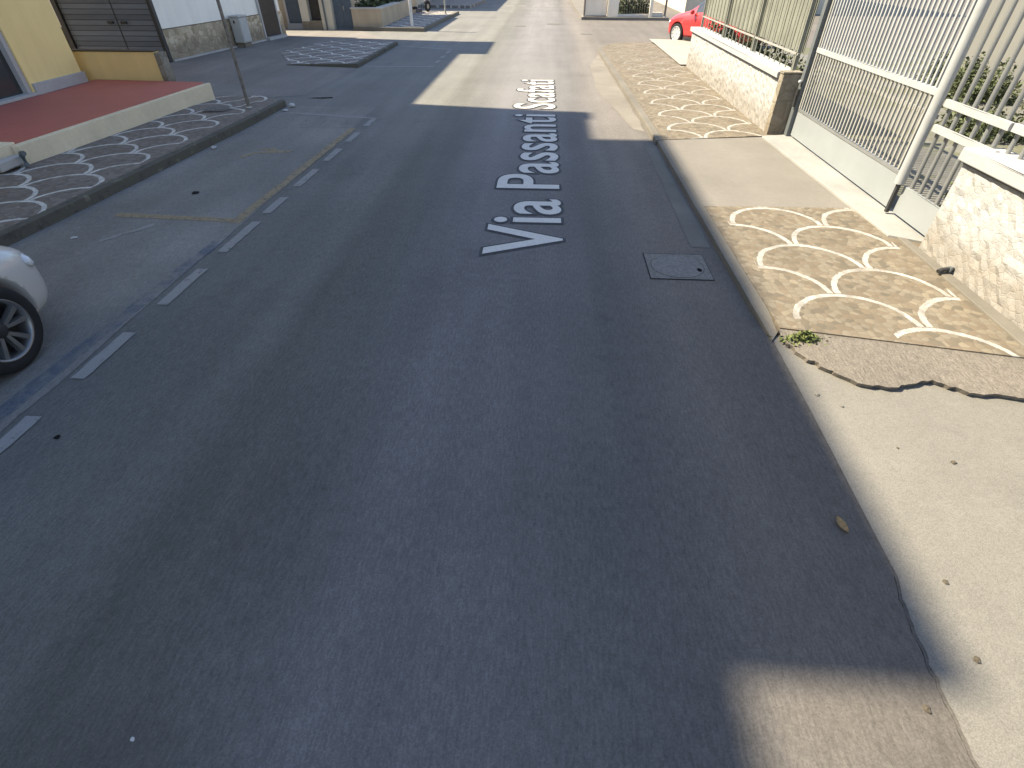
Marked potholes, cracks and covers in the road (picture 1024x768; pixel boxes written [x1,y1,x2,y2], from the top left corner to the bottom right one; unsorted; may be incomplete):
manhole cover [643,253,714,280]
